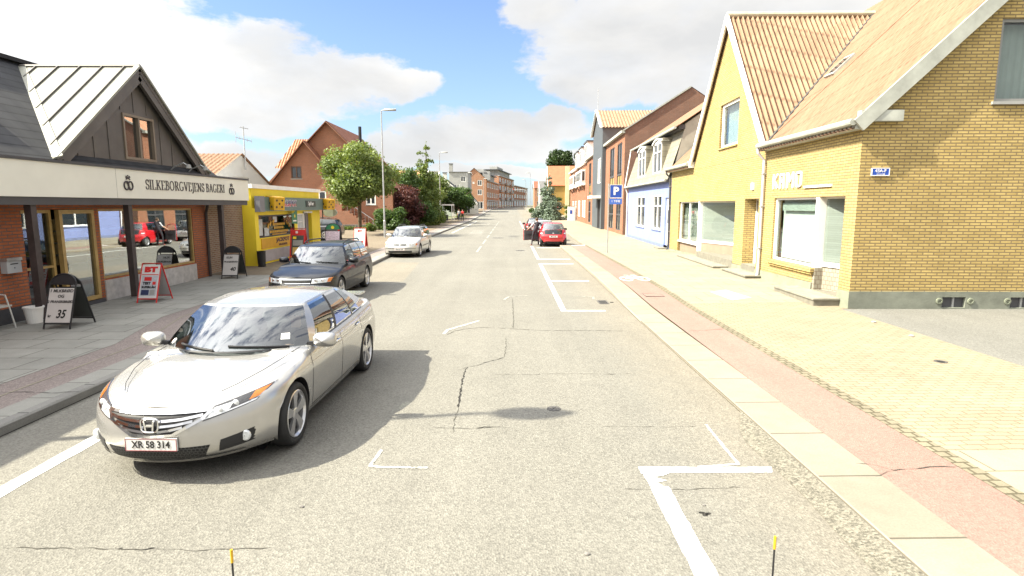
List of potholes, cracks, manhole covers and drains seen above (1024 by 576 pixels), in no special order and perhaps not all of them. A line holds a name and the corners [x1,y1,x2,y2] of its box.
crack [447,299,630,432]
crack [861,463,962,476]
